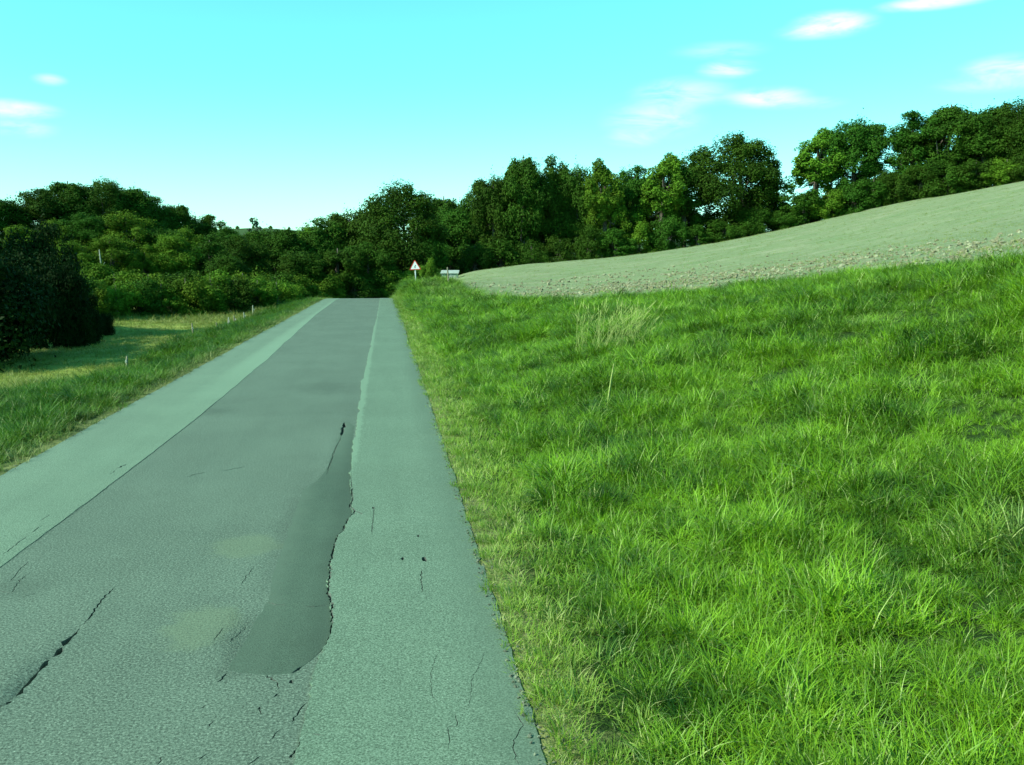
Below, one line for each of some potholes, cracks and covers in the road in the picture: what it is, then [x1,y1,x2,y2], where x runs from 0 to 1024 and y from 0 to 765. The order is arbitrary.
crack [512,709,524,762]
crack [6,589,113,705]
crack [157,412,374,765]
crack [430,652,485,743]
